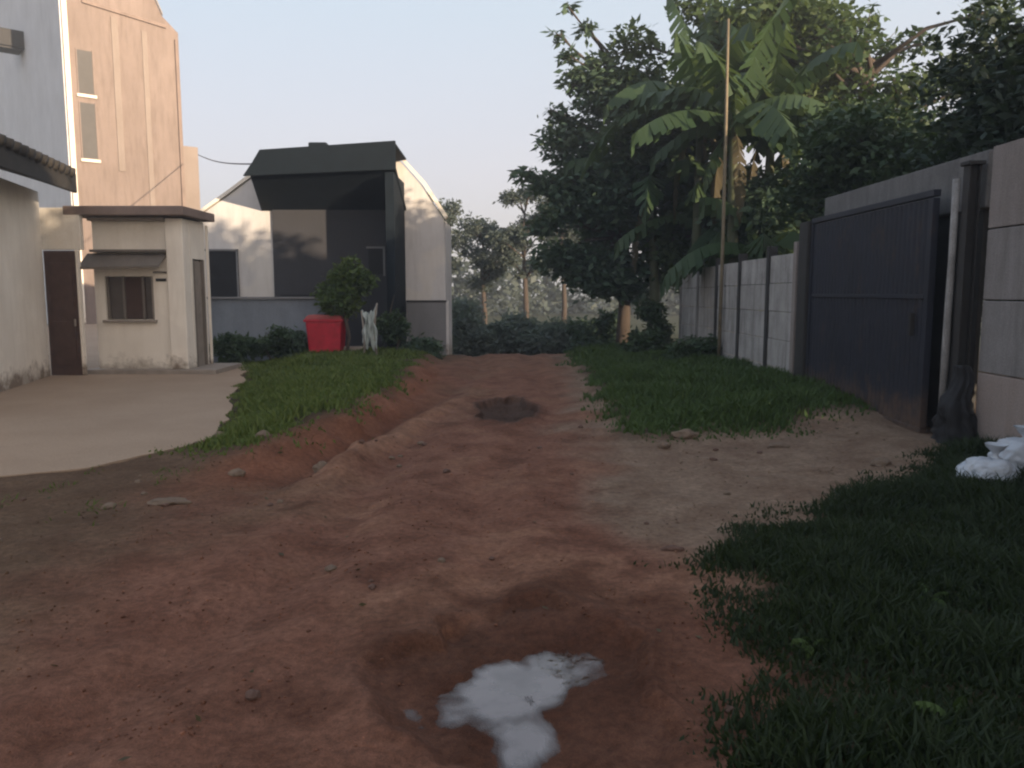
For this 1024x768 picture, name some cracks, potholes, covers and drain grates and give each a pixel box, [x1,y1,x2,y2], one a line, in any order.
pothole [308,573,732,768]
pothole [468,393,547,427]
